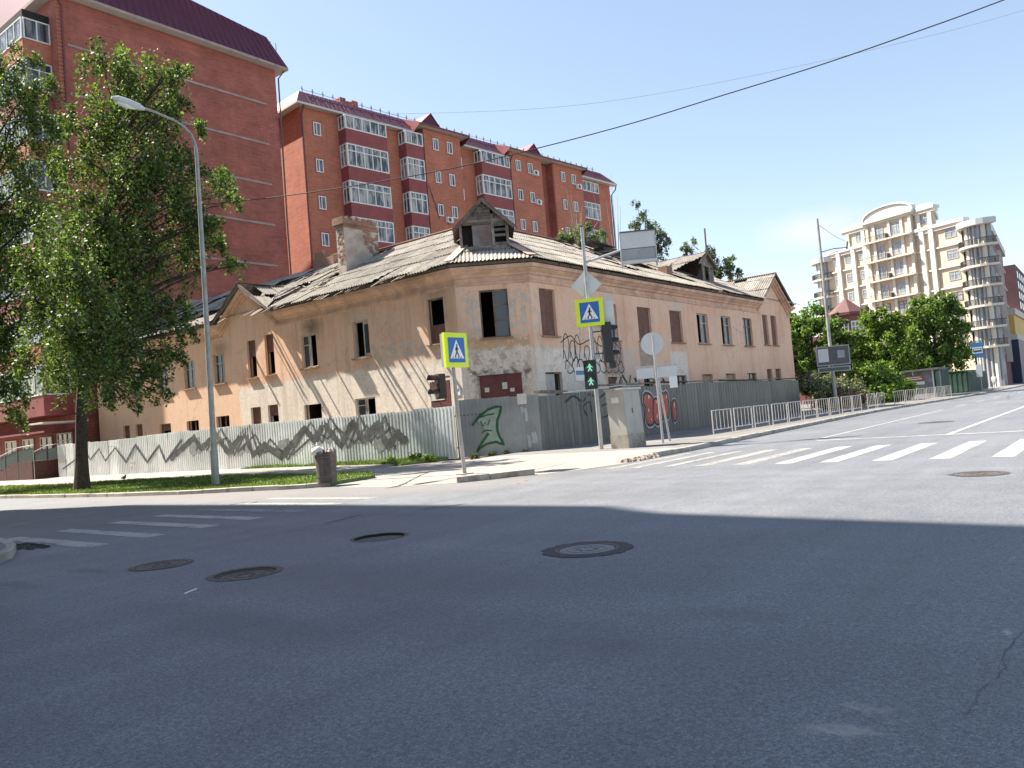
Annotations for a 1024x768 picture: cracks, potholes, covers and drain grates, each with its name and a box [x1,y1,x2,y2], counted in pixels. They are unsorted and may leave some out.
manhole cover [349,532,409,542]
manhole cover [206,565,283,582]
manhole cover [541,541,634,557]
manhole cover [128,559,194,571]
crack [960,633,1021,716]
